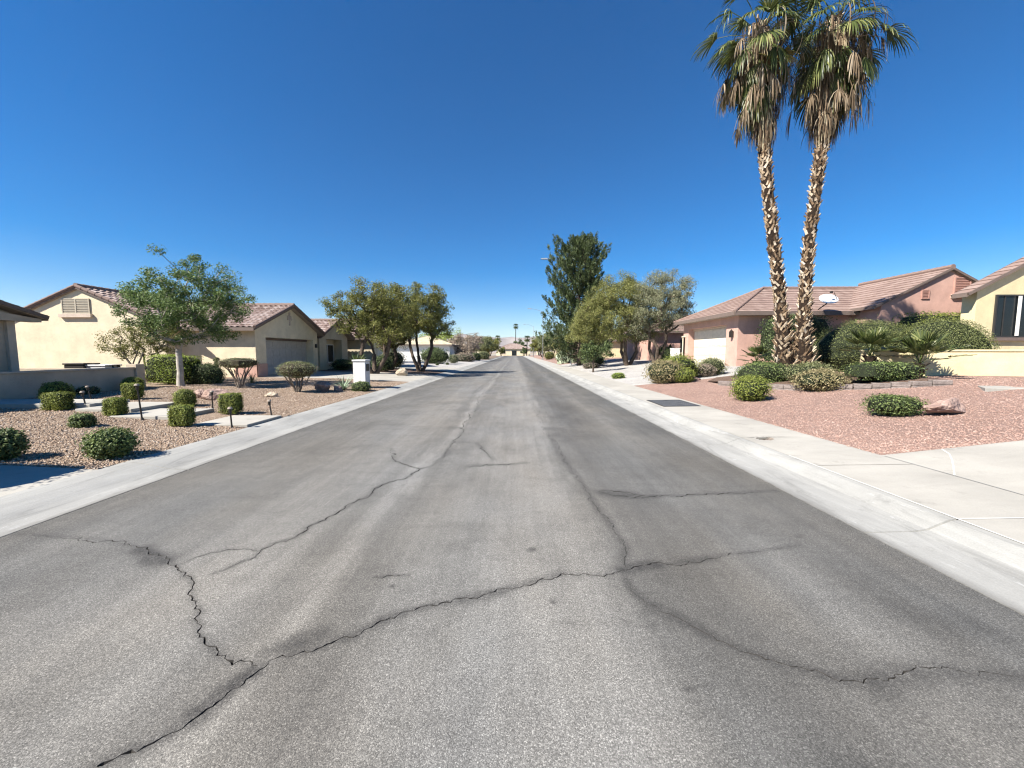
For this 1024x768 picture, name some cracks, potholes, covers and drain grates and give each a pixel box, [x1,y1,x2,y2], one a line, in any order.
crack [26,533,764,767]
crack [195,452,420,570]
crack [598,490,758,498]
crack [632,591,1019,683]
